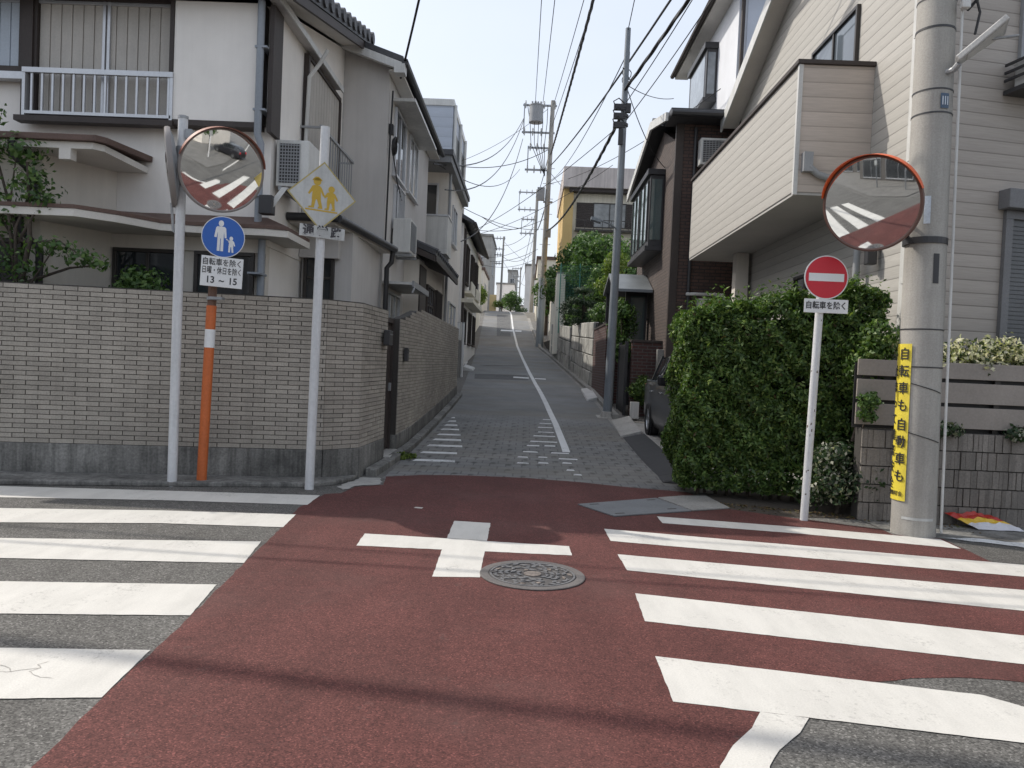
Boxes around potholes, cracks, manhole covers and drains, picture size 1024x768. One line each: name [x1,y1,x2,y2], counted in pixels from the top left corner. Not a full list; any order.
manhole cover [480,560,585,591]
